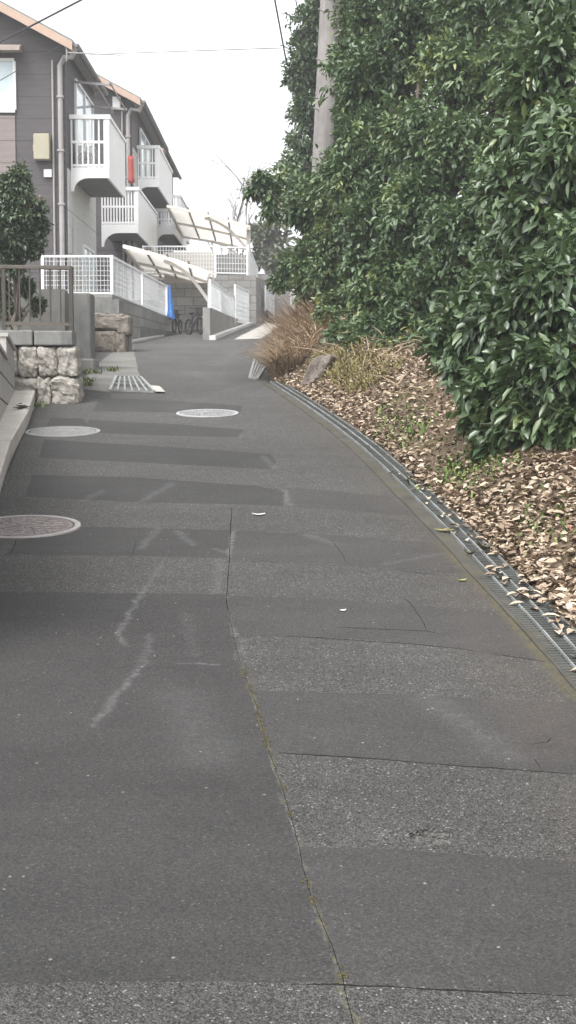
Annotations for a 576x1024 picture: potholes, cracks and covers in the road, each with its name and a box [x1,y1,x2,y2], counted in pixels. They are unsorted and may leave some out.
drain grate [361,445,403,469]
drain grate [340,428,378,448]
drain grate [109,375,156,393]
drain grate [384,466,433,496]
drain grate [447,528,515,573]
pothole [408,828,454,845]
drain grate [300,401,332,415]
drain grate [478,571,574,632]
drain grate [533,629,576,683]
manhole cover [25,426,100,437]
drain grate [283,389,313,402]
